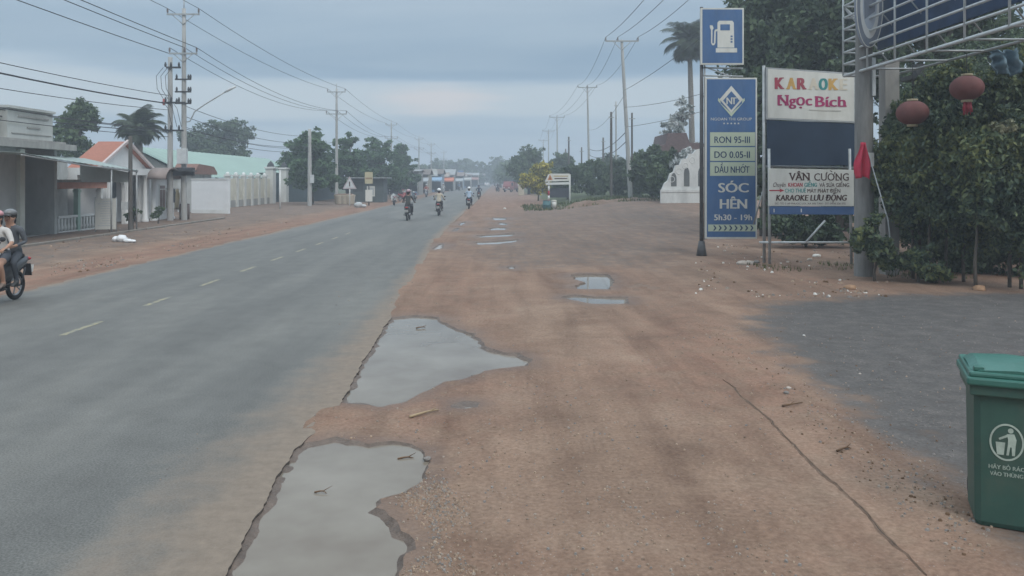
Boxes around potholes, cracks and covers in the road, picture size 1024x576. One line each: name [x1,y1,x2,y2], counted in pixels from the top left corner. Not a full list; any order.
pothole [561,295,629,304]
pothole [571,273,615,289]
crack [724,380,927,575]
pothole [228,436,431,576]
pothole [342,315,533,407]
